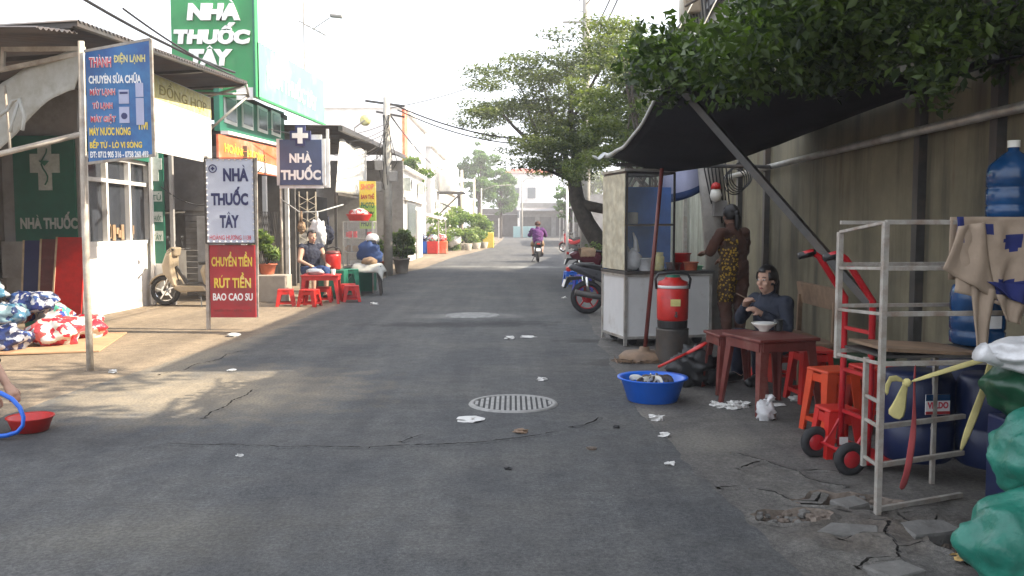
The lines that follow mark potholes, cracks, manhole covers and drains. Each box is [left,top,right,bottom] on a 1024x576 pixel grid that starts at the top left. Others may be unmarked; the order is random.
pothole [745,507,841,527]
crack [716,452,967,572]
crack [159,350,603,449]
